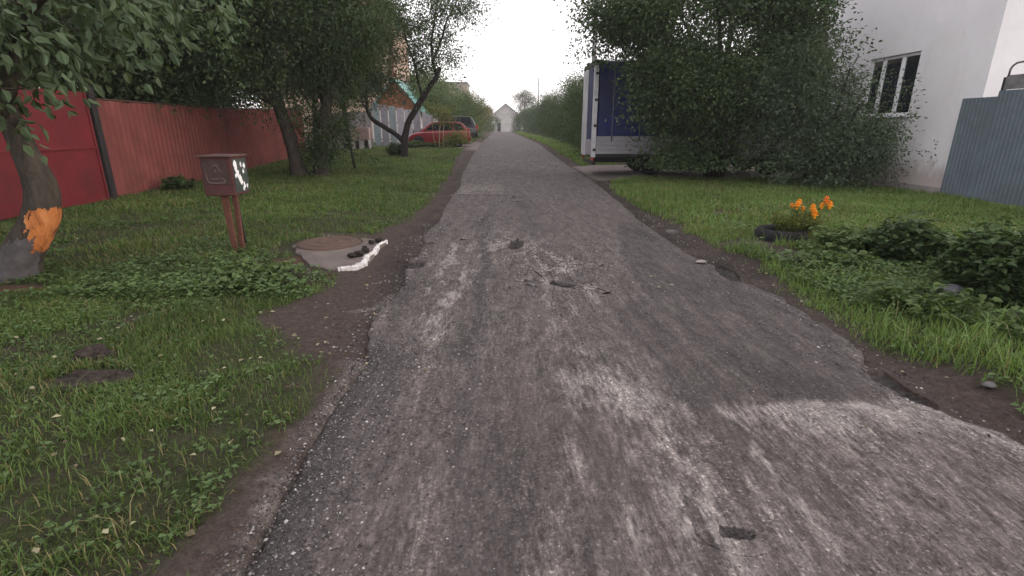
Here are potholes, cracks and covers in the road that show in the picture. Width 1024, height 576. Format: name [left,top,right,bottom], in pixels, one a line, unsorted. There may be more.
pothole [696,512,780,556]
crack [502,253,610,294]
pothole [499,237,532,252]
pothole [537,277,587,292]
manhole cover [292,236,388,271]
pothole [845,358,963,421]
pothole [705,263,749,284]
